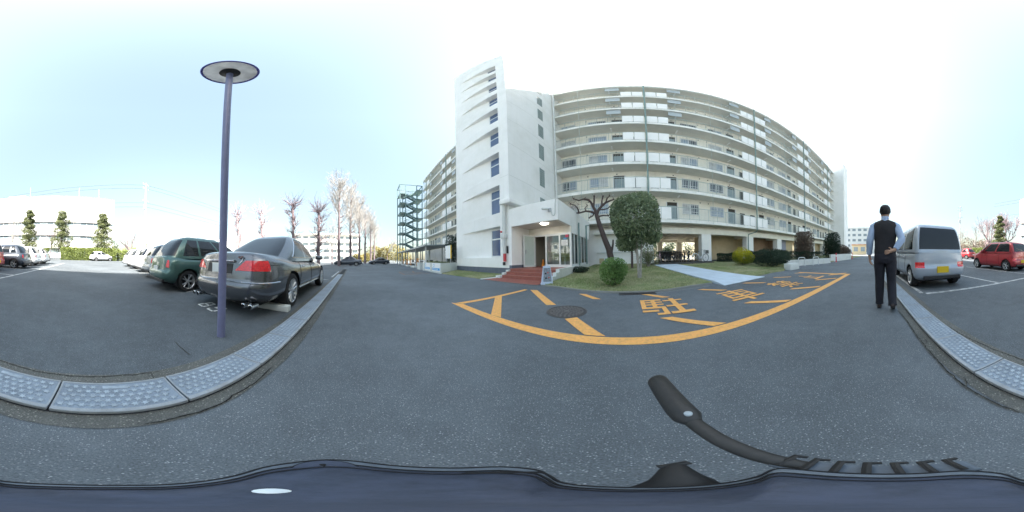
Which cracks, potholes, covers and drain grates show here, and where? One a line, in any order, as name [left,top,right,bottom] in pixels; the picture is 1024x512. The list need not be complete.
manhole cover [546,306,587,318]
